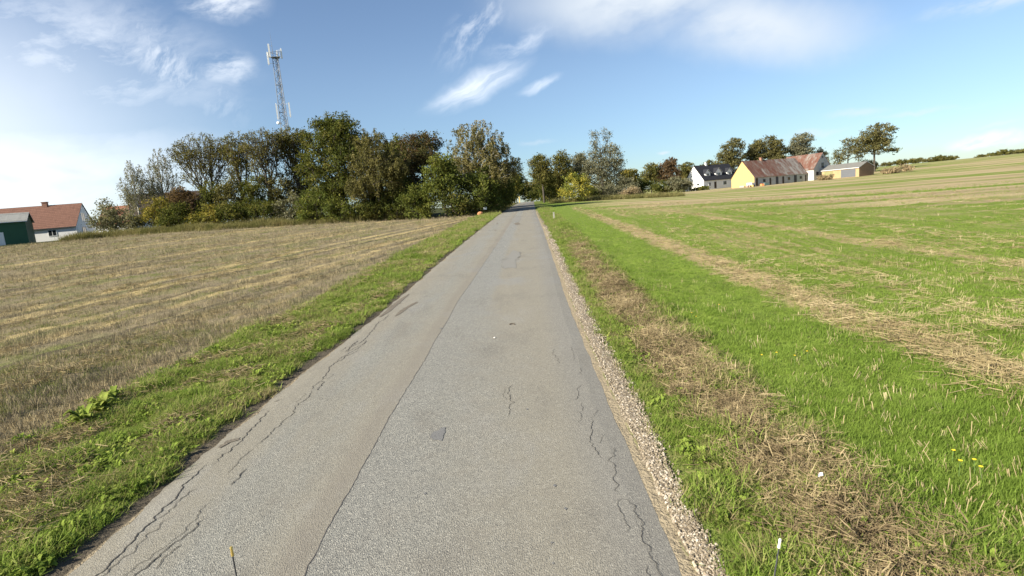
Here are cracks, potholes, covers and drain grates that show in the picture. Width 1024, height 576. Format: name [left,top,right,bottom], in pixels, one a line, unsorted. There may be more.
crack [577,385,662,576]
crack [95,318,385,576]
